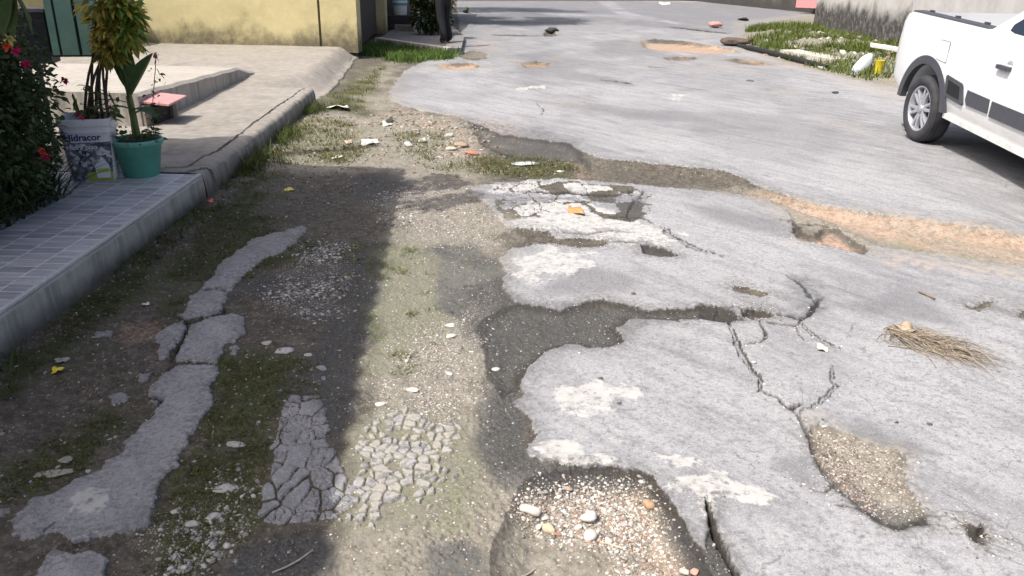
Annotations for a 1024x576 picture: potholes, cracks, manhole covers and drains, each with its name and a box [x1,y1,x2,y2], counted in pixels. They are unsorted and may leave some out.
pothole [489,463,712,576]
pothole [574,154,1024,266]
pothole [475,298,741,399]
pothole [520,60,552,68]
pothole [435,62,482,70]
pothole [808,420,930,531]
pothole [640,38,742,54]
pothole [964,519,996,545]
crack [705,497,741,576]
crack [712,274,867,514]
